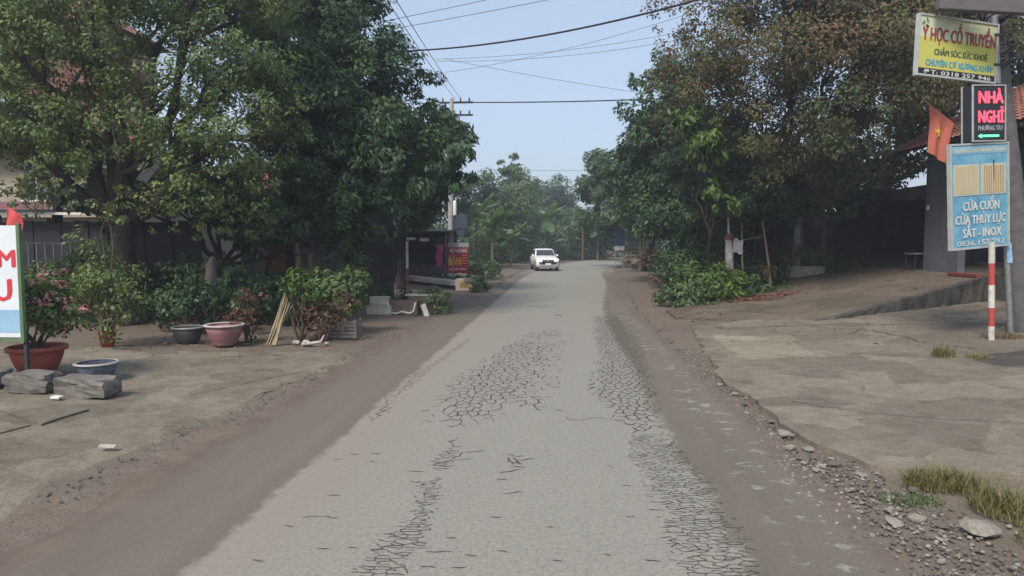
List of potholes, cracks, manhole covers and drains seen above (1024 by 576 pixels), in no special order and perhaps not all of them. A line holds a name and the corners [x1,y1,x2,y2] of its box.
crack [347,438,486,576]
crack [425,300,564,427]
crack [561,316,768,576]
